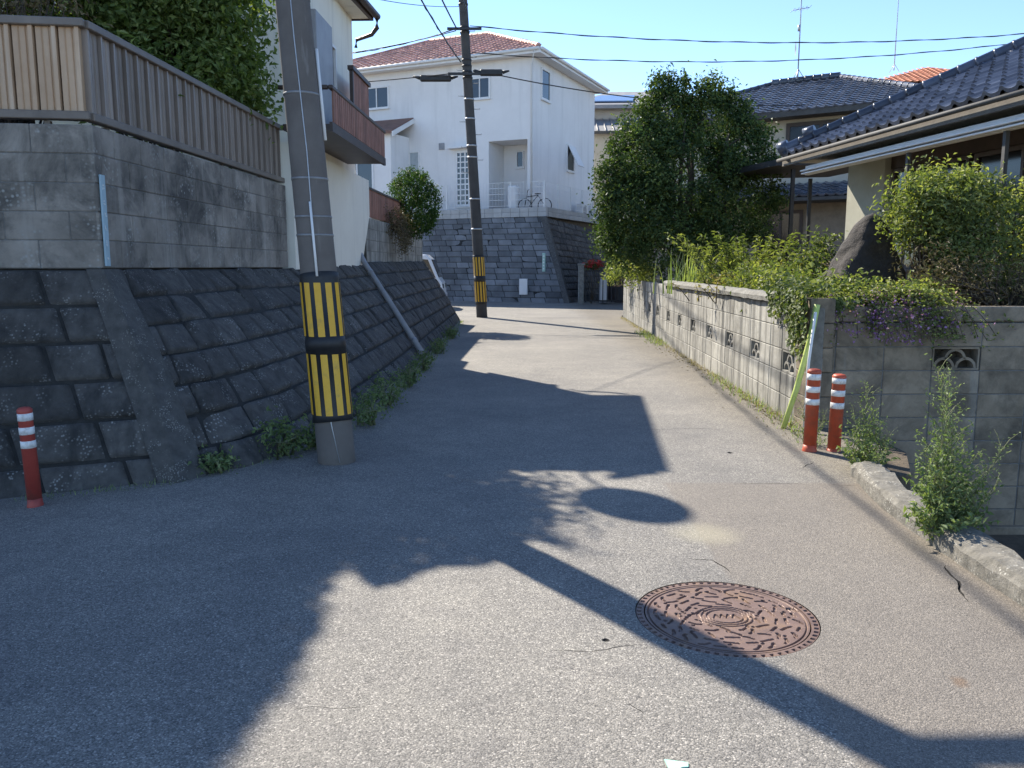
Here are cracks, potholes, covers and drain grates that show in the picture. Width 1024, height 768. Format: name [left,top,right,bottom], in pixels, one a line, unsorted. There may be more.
crack [944,565,969,602]
manhole cover [636,582,820,658]
